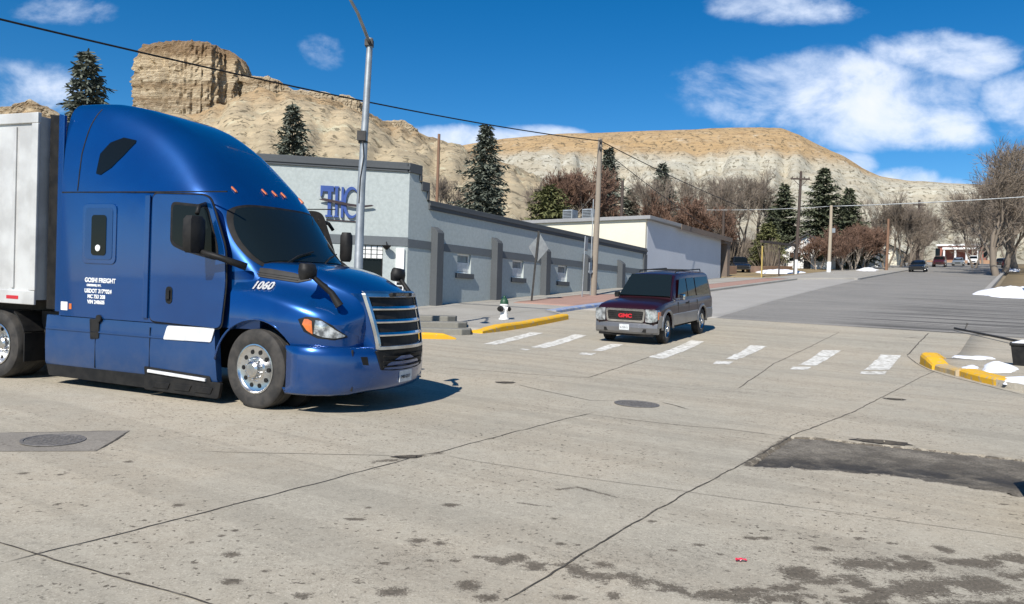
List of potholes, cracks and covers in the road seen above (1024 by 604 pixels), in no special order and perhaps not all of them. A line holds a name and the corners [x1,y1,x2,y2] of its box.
manhole cover [19,434,86,446]
manhole cover [614,400,660,408]
